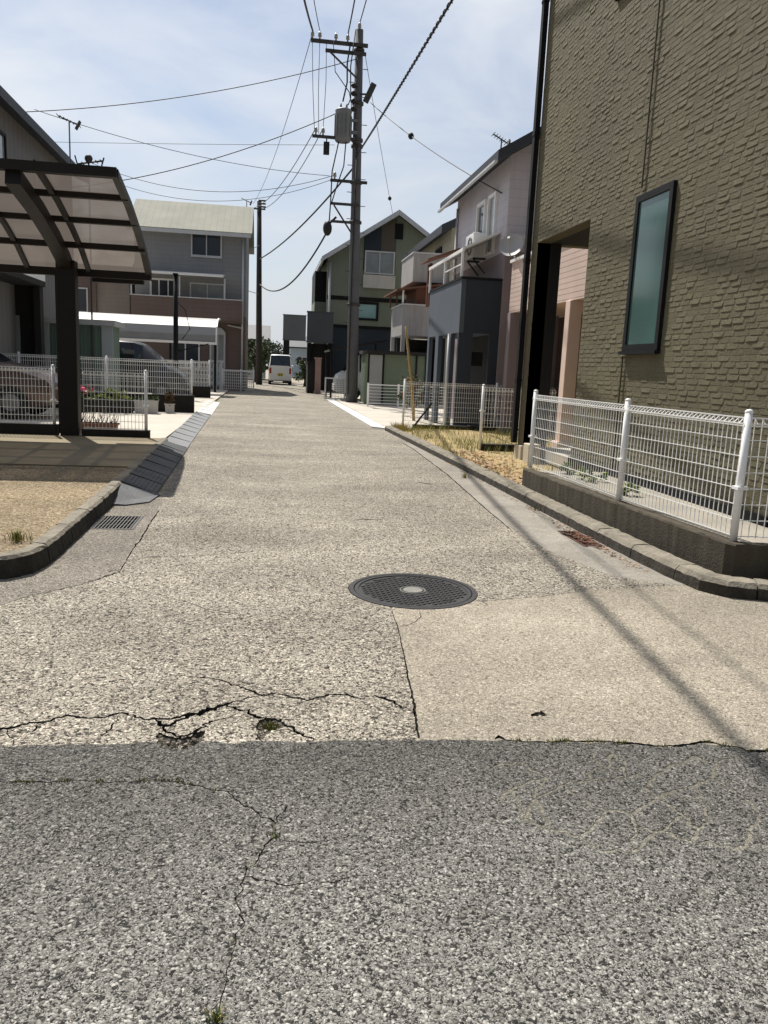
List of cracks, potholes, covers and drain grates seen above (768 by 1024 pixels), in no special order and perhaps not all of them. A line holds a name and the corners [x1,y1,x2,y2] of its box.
crack [493,735,768,854]
drain grate [88,515,144,530]
pothole [156,731,205,749]
crack [0,776,363,1024]
crack [0,675,410,743]
manhole cover [349,573,477,610]
